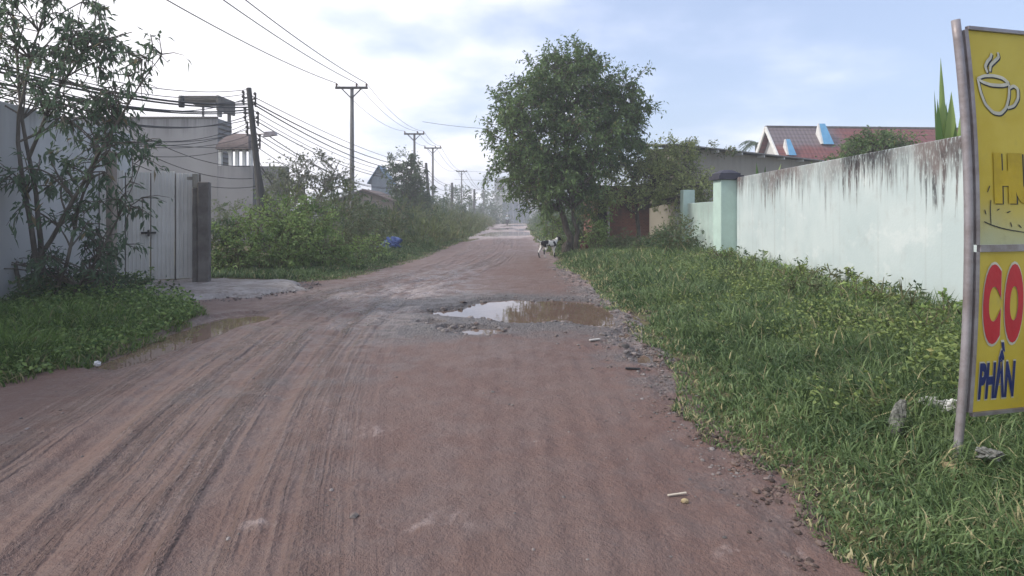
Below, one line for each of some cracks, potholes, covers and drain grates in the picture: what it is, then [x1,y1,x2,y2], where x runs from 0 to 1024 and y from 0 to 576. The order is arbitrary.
pothole [81,310,283,373]
pothole [416,295,631,328]
pothole [441,322,512,336]
